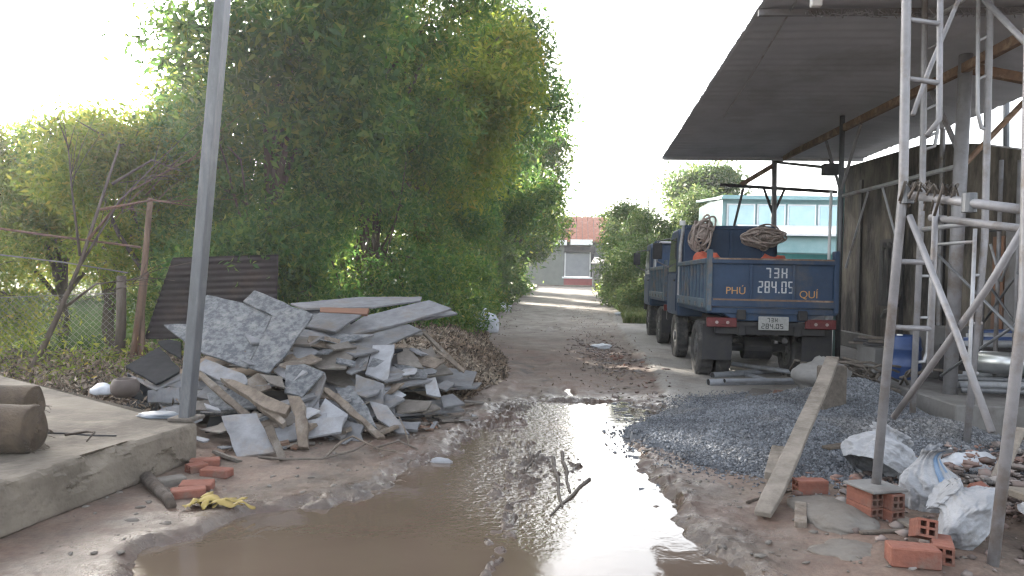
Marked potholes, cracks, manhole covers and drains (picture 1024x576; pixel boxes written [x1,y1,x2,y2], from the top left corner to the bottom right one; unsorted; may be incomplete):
pothole [85,396,773,576]
